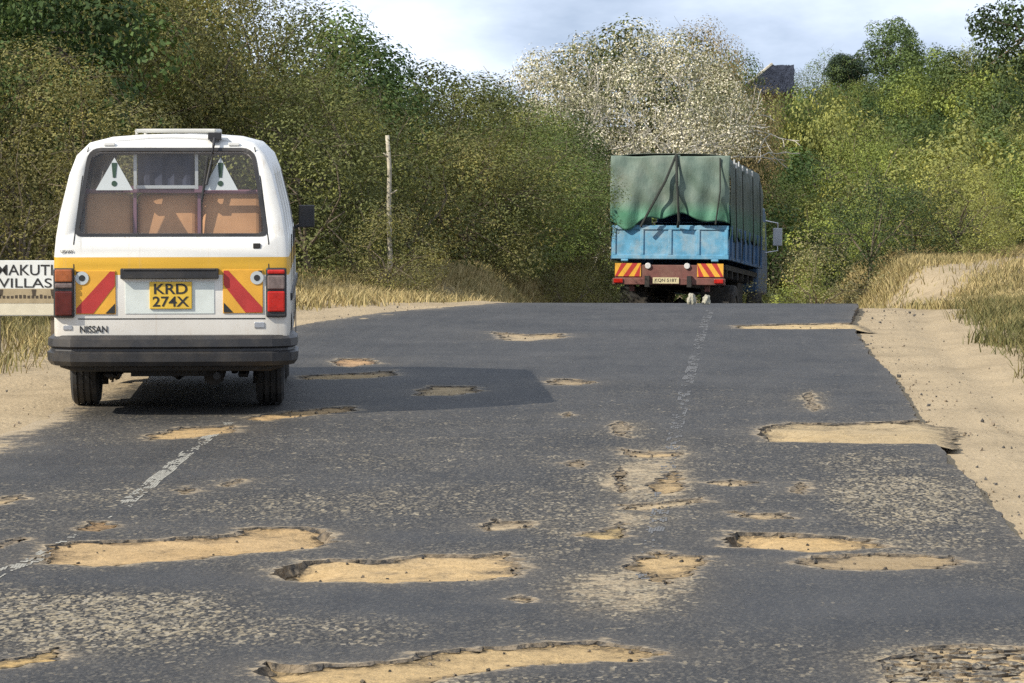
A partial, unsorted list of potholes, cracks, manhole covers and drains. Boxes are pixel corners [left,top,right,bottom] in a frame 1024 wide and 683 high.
pothole [143,425,241,440]
pothole [757,420,962,450]
pothole [721,531,890,552]
pothole [618,448,685,458]
pothole [621,550,711,585]
pothole [802,391,822,412]
pothole [476,518,536,531]
pothole [330,358,379,367]
pothole [609,467,632,493]
pothole [491,332,568,341]
pothole [414,386,486,396]
pothole [34,527,339,567]
